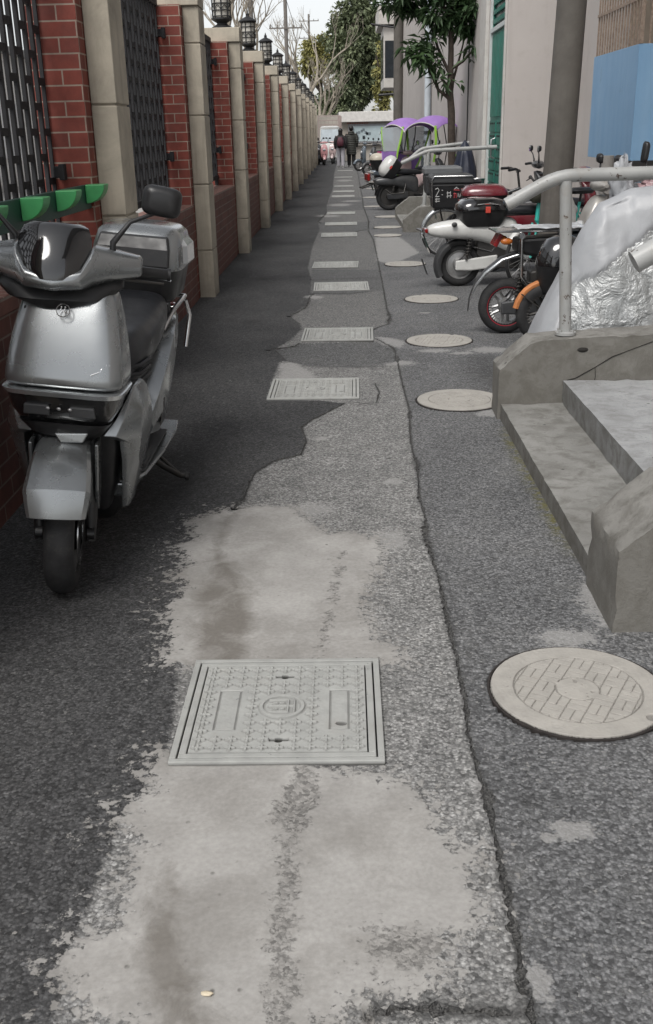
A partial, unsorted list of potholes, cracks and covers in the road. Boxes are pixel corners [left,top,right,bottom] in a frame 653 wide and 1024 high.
manhole cover [168,658,385,766]
manhole cover [301,327,374,342]
manhole cover [313,281,370,292]
manhole cover [312,261,359,269]
manhole cover [487,647,653,742]
manhole cover [415,389,493,412]
manhole cover [405,334,473,348]
manhole cover [404,294,459,304]
crack [370,988,531,1024]
manhole cover [267,377,359,400]
crack [227,343,396,509]
